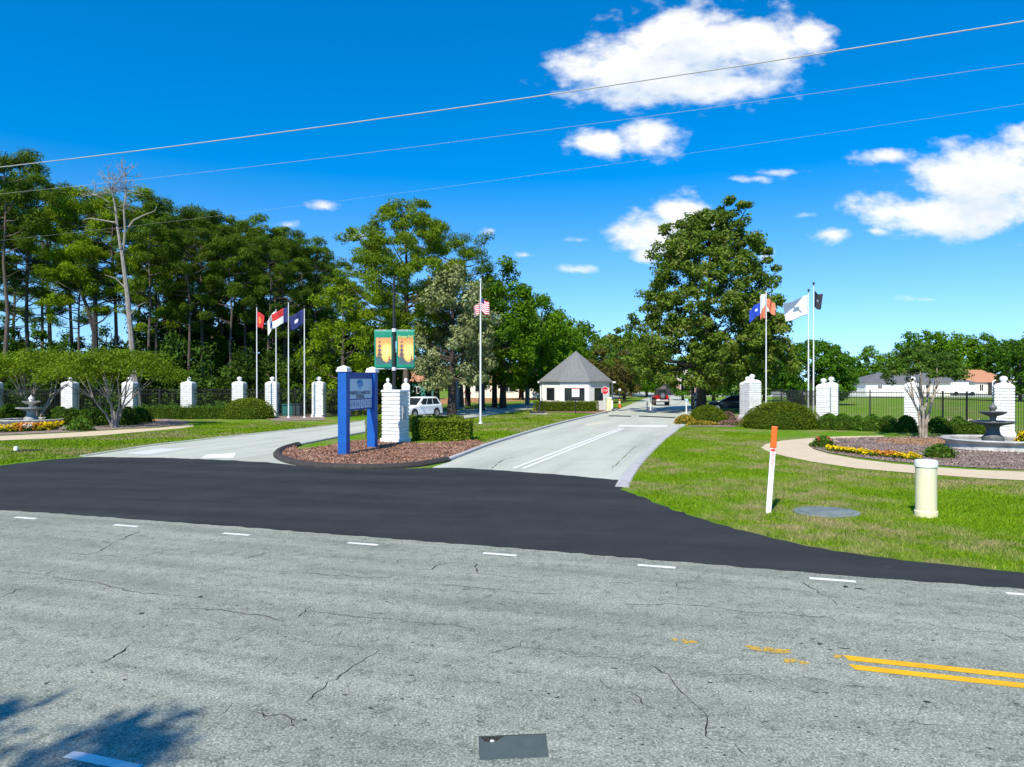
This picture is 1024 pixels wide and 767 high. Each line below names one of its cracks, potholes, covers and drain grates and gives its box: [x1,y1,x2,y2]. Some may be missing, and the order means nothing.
crack [2,532,468,644]
crack [631,580,836,619]
crack [215,650,379,726]
manhole cover [479,733,549,760]
manhole cover [793,506,861,518]
crack [485,640,748,757]
